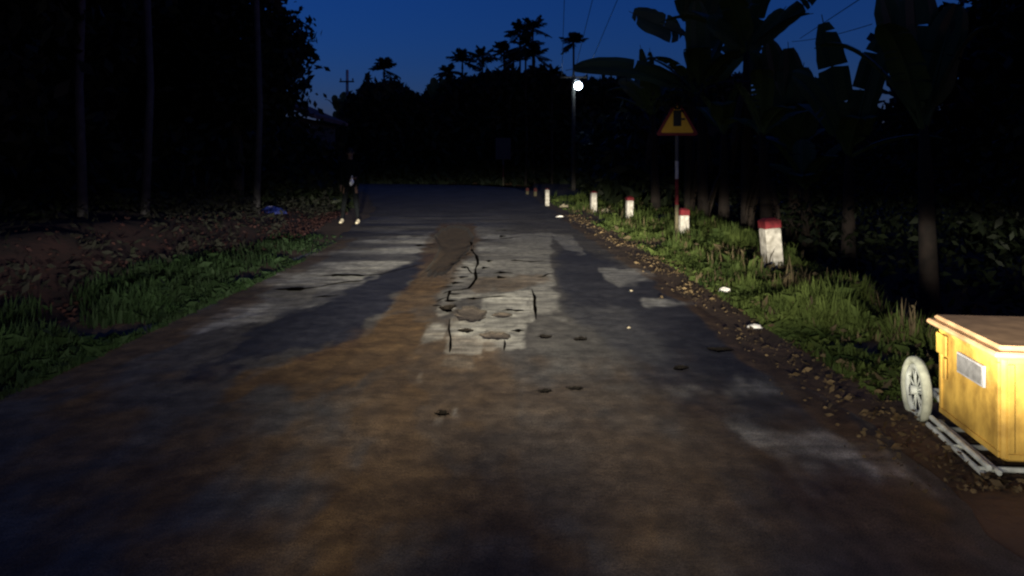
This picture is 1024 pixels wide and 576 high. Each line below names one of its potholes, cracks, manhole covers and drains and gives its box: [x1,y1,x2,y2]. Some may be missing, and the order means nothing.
pothole [432,409,452,417]
crack [434,230,552,353]
pothole [489,311,515,319]
pothole [449,304,491,325]
pothole [474,330,515,341]
